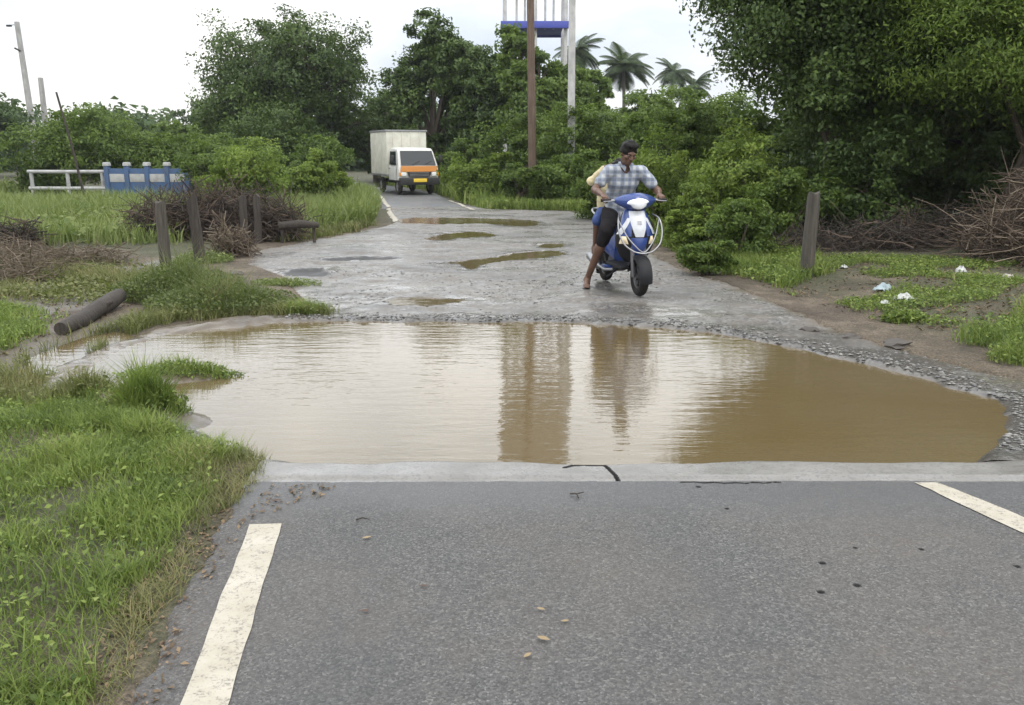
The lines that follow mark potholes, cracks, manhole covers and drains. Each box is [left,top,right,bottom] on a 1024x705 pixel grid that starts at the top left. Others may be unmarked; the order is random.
pothole [440,249,571,270]
pothole [41,314,1024,465]
pothole [378,295,474,307]
pothole [393,216,544,226]
crack [562,465,621,481]
pothole [417,230,499,241]
